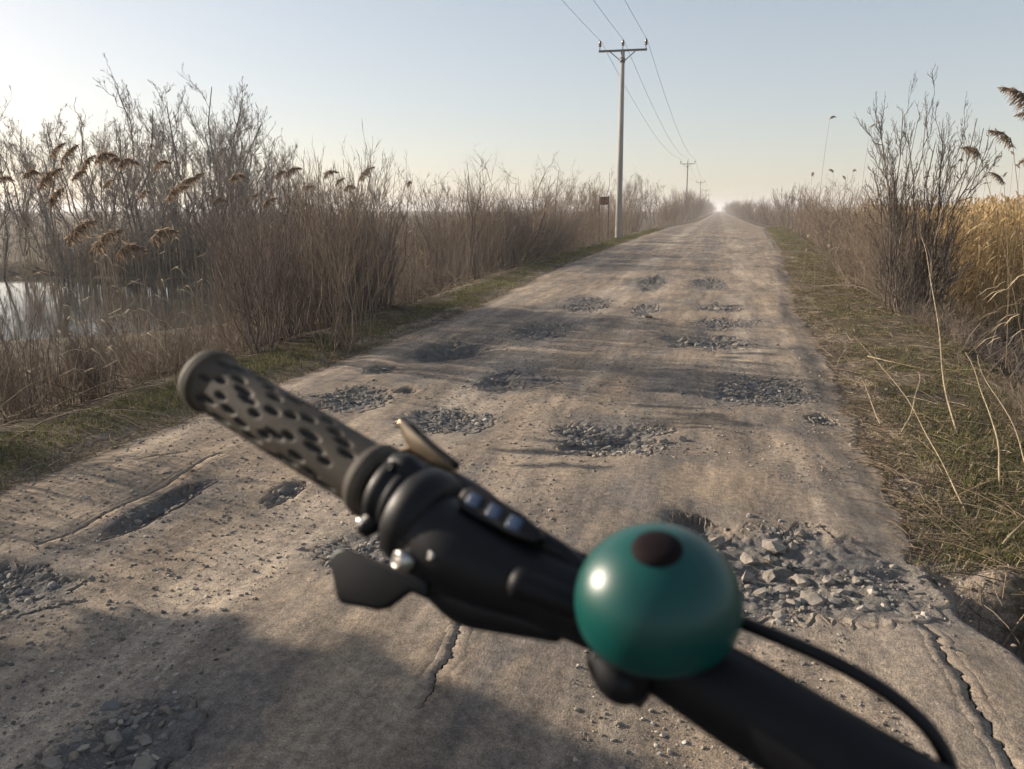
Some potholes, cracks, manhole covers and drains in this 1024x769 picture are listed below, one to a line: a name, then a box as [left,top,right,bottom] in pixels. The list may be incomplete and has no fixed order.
pothole [386,403,507,436]
pothole [462,363,579,399]
pothole [636,332,779,351]
pothole [28,689,208,769]
crack [19,448,239,550]
pothole [310,379,405,413]
pothole [693,302,745,313]
pothole [674,373,844,410]
pothole [683,276,734,291]
pothole [98,479,218,541]
pothole [265,481,306,509]
pothole [693,317,765,331]
